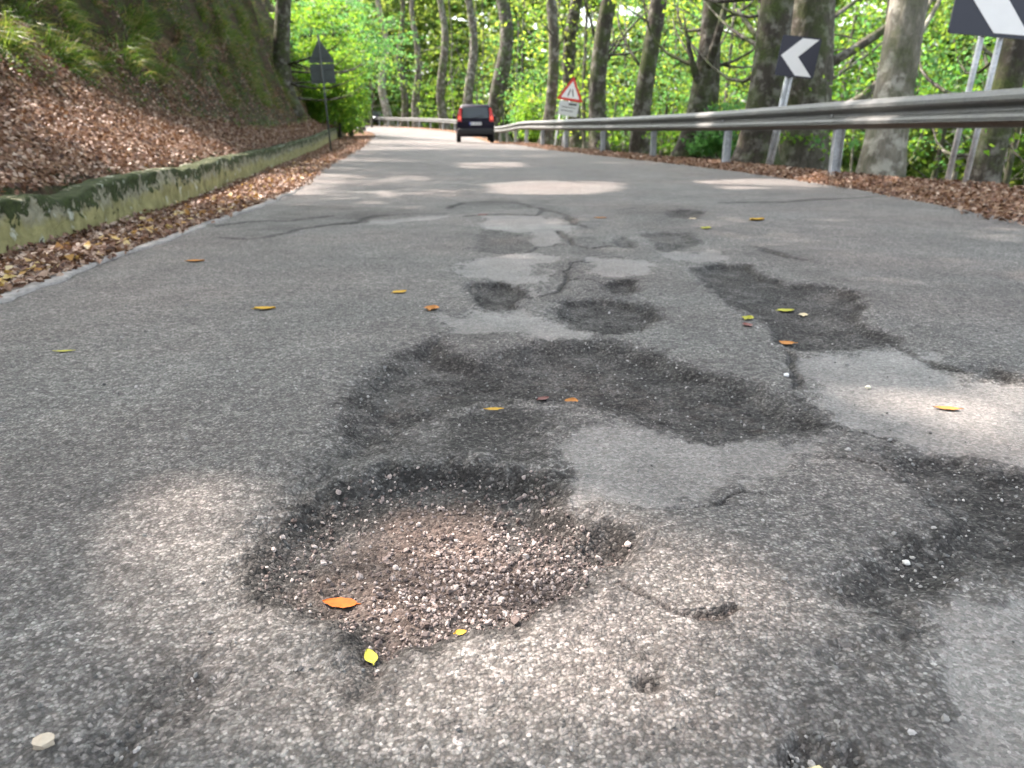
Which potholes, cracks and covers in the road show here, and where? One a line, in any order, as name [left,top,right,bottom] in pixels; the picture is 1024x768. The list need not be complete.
pothole [628,676,660,694]
crack [613,578,746,624]
crack [209,201,616,298]
pothole [232,456,646,704]
